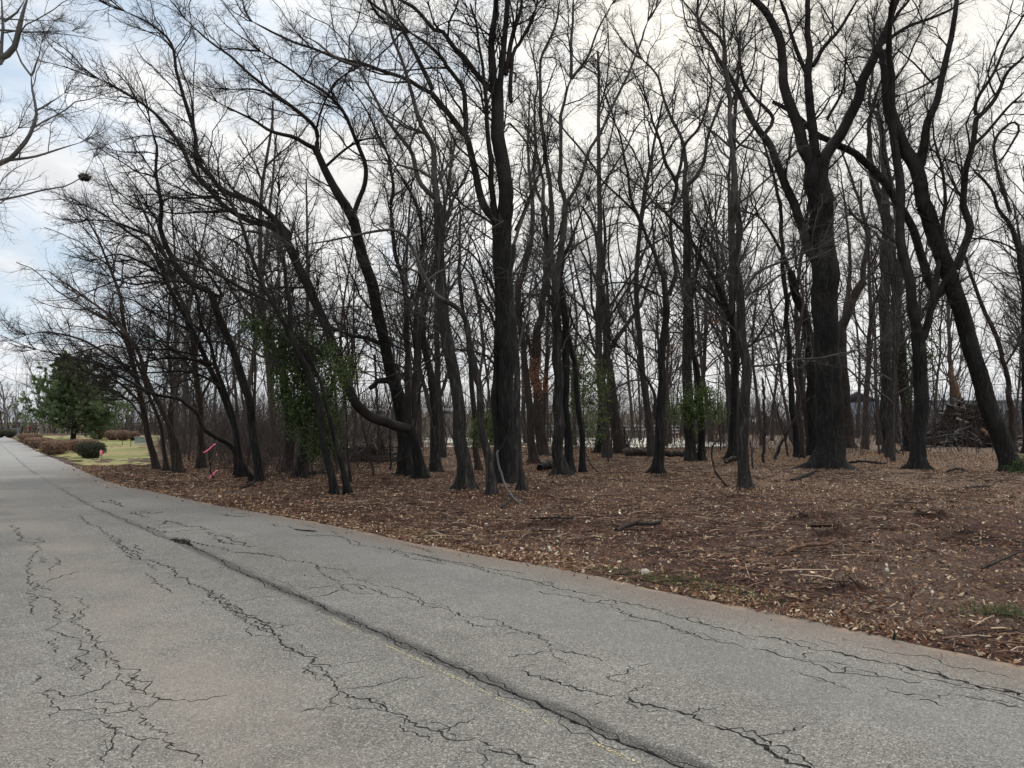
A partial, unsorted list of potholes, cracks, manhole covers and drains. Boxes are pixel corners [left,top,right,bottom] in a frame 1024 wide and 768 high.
crack [11,525,229,768]
crack [78,500,815,768]
crack [317,531,1024,709]
